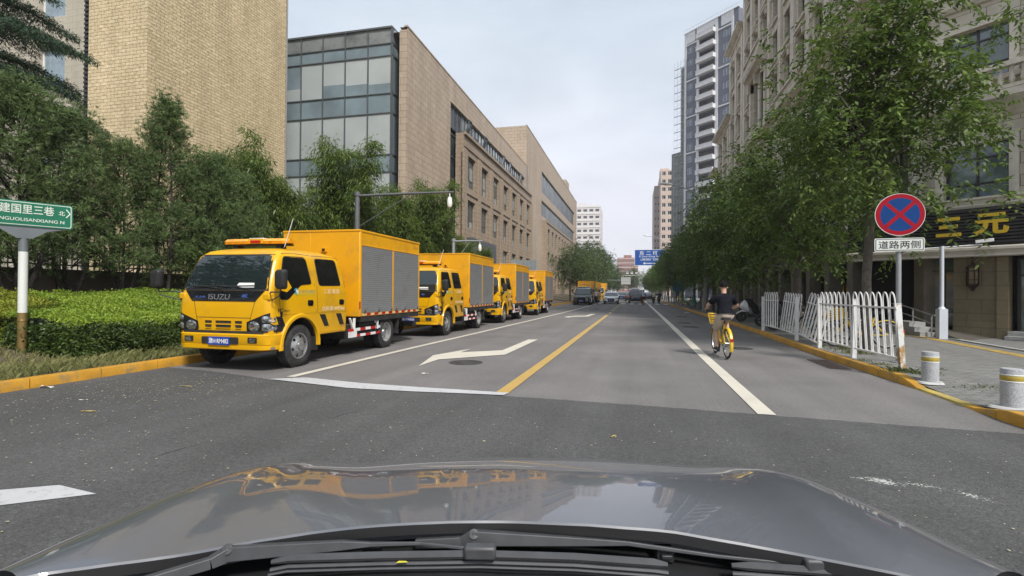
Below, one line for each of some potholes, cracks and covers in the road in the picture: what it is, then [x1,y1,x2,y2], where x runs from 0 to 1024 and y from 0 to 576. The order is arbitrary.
crack [149,445,198,459]
